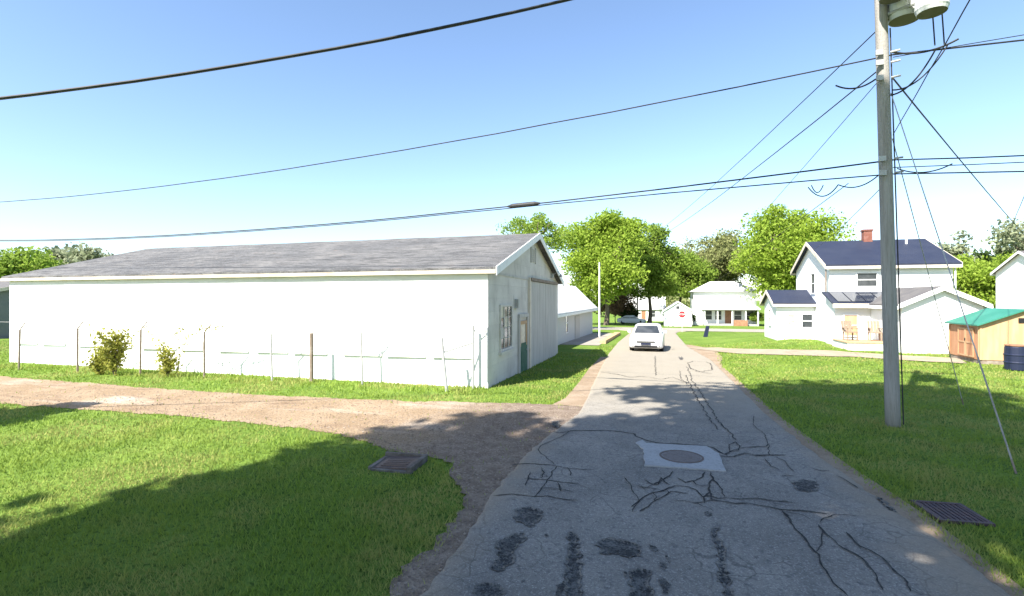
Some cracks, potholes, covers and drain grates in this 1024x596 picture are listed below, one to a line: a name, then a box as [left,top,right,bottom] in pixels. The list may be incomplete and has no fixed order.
crack [606,356,911,596]
drain grate [910,500,996,527]
drain grate [368,451,428,474]
manhole cover [659,450,704,463]
crack [494,432,588,500]
